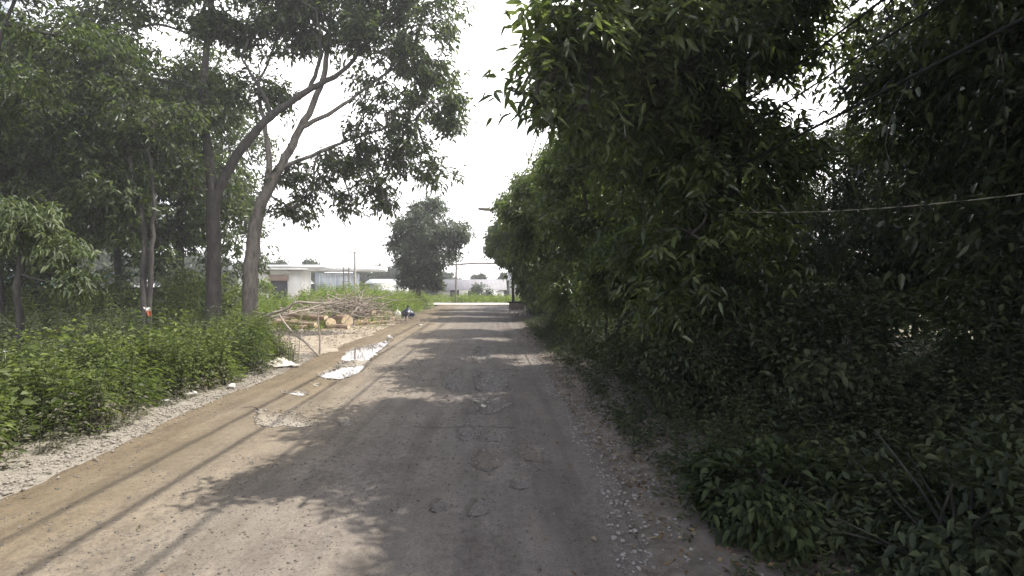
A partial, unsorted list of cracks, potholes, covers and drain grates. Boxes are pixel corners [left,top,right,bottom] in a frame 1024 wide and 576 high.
pothole [470,370,510,393]
pothole [439,369,464,391]
pothole [334,415,357,427]
pothole [465,495,491,518]
pothole [465,446,503,472]
pothole [454,423,480,442]
pothole [472,395,516,415]
pothole [507,475,532,489]
pothole [517,445,544,461]
pothole [253,409,322,429]
pothole [475,429,509,443]
pothole [315,339,393,380]
